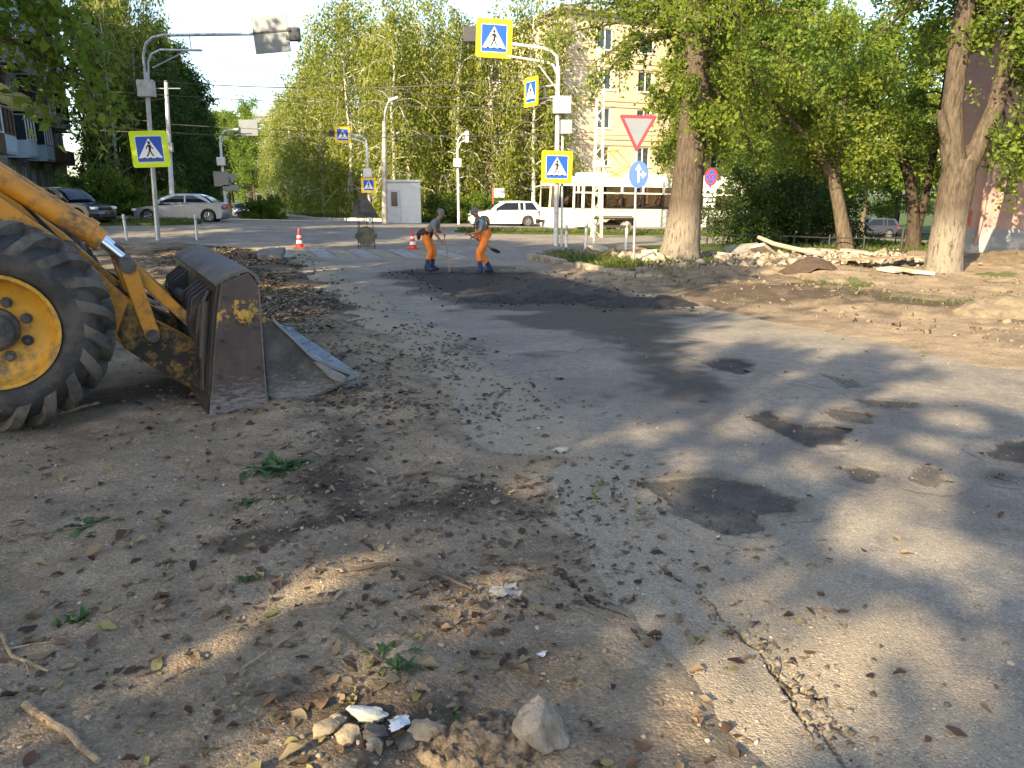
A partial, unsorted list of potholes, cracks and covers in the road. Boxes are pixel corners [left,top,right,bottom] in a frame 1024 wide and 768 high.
pothole [804,369,880,393]
pothole [840,395,936,413]
crack [539,553,892,768]
pothole [692,356,769,377]
pothole [621,468,826,550]
pothole [729,407,874,452]
